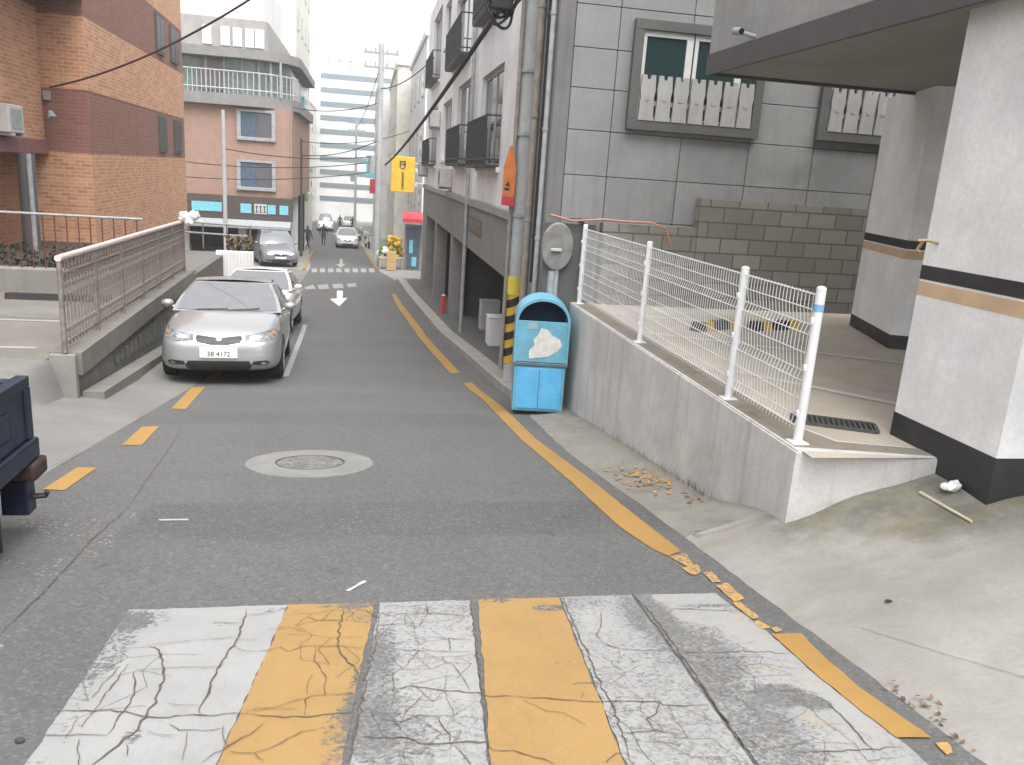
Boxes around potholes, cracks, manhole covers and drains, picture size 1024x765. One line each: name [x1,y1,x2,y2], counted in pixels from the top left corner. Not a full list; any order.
drain grate [790,412,880,434]
manhole cover [245,450,373,478]
